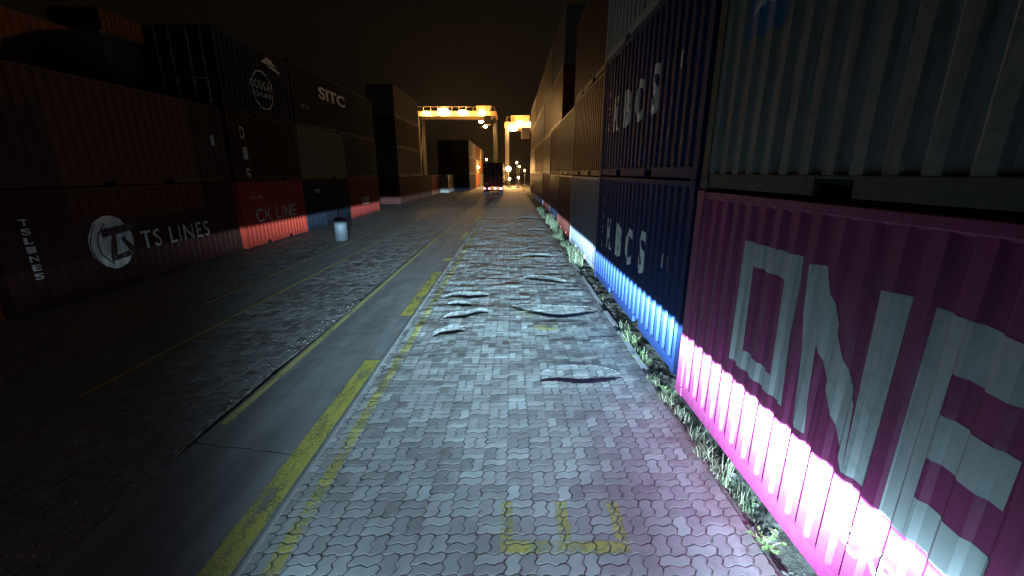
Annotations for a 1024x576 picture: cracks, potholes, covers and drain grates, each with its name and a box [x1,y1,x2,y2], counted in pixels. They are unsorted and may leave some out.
pothole [512,304,600,318]
pothole [432,325,465,337]
pothole [443,308,489,319]
pothole [523,275,567,283]
pothole [539,365,623,383]
